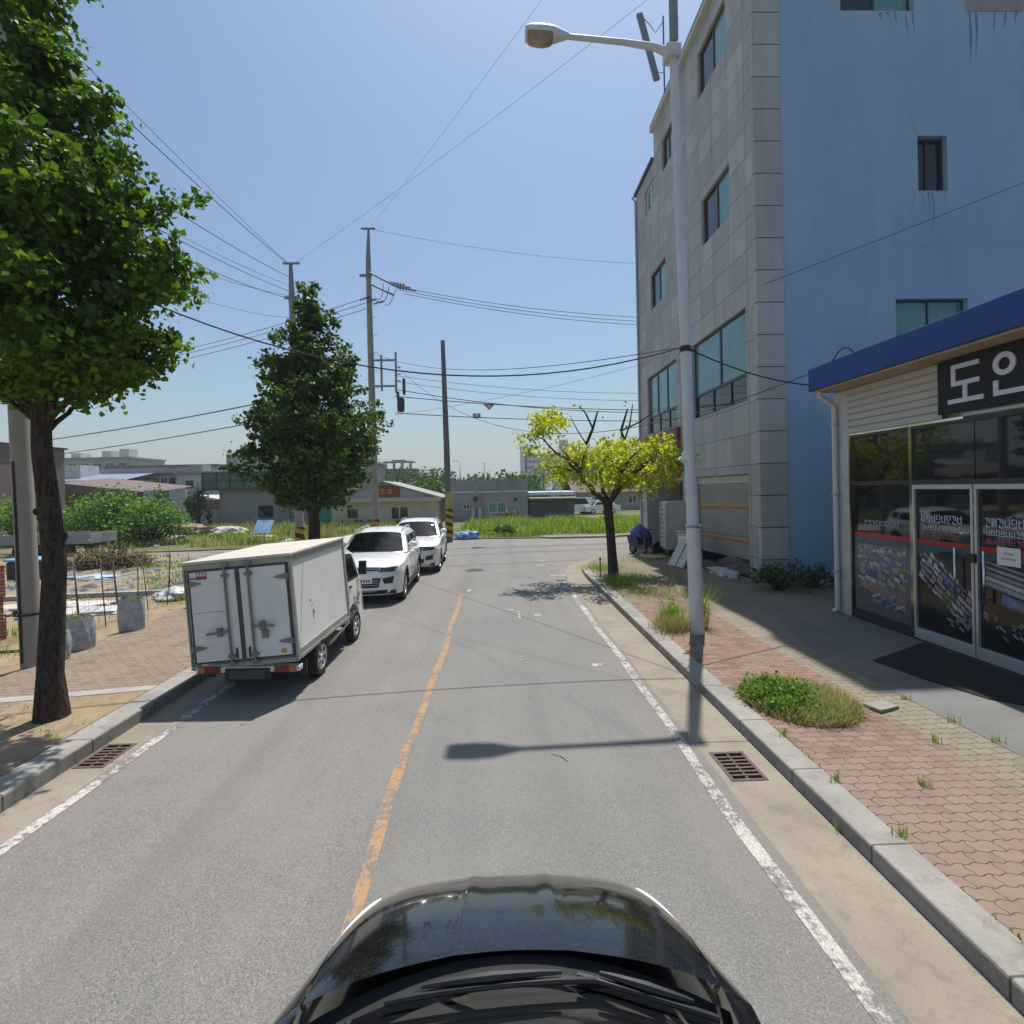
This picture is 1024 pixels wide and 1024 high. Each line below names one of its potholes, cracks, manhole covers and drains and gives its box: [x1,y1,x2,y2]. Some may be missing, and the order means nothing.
drain grate [71,743,138,769]
drain grate [709,751,769,782]
